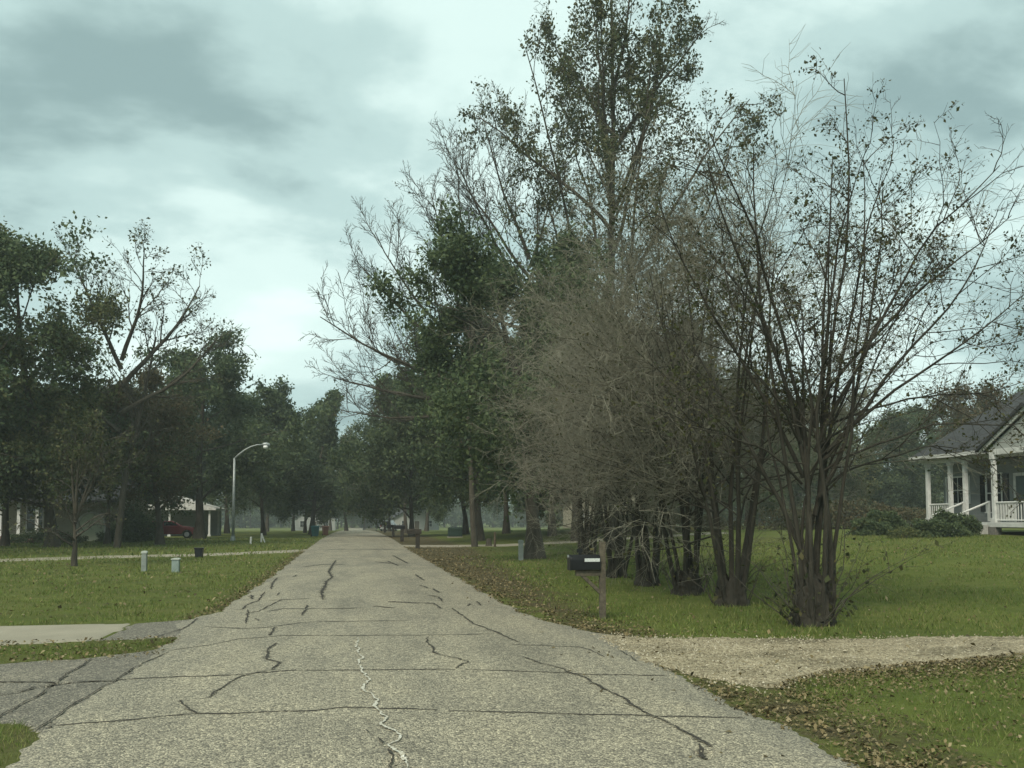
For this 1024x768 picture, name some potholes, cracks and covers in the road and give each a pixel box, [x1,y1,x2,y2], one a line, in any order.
crack [0,549,745,768]
